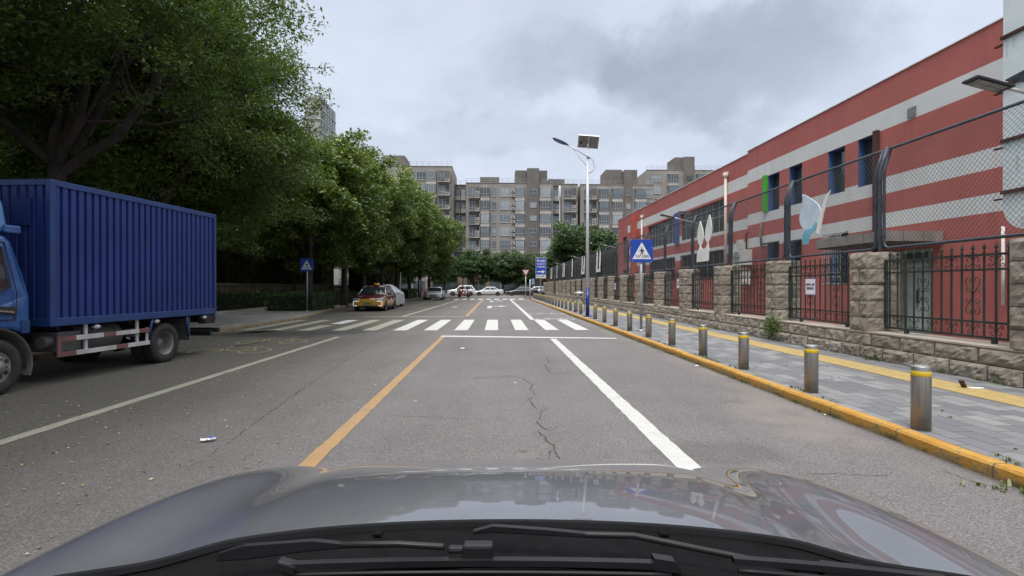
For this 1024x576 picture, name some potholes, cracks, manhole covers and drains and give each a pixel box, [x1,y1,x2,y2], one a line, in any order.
crack [486,358,560,459]
